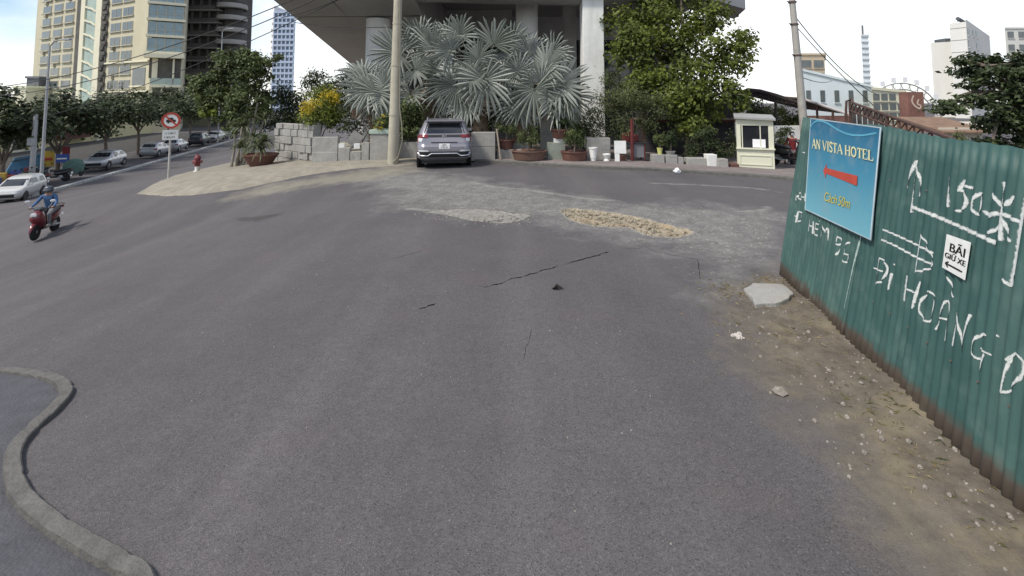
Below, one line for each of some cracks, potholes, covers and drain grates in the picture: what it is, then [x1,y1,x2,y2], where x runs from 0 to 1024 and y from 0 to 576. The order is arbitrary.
crack [487,252,608,287]
